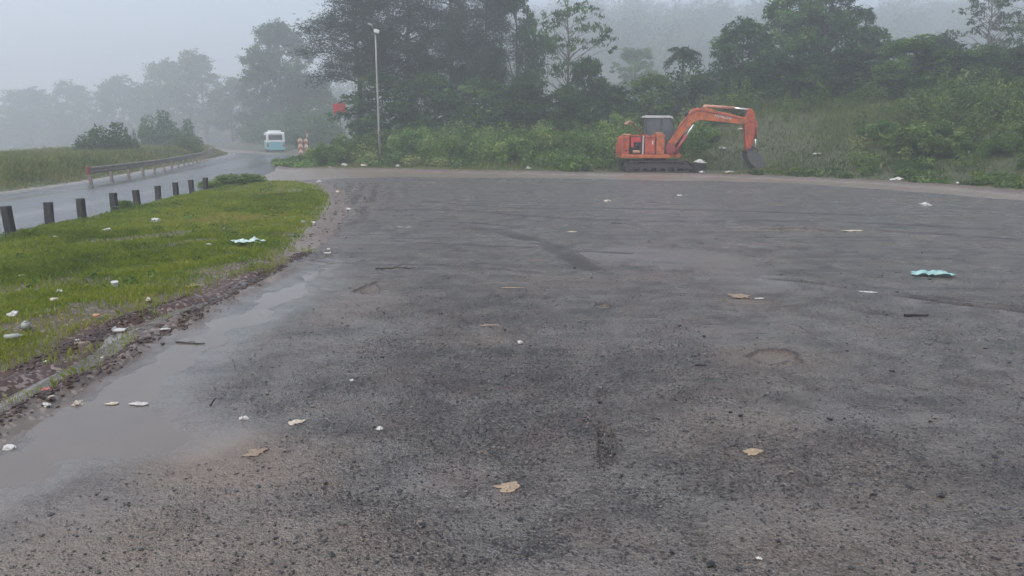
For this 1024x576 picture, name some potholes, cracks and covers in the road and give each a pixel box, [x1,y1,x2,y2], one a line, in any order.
pothole [350,281,380,294]
pothole [742,347,806,366]
